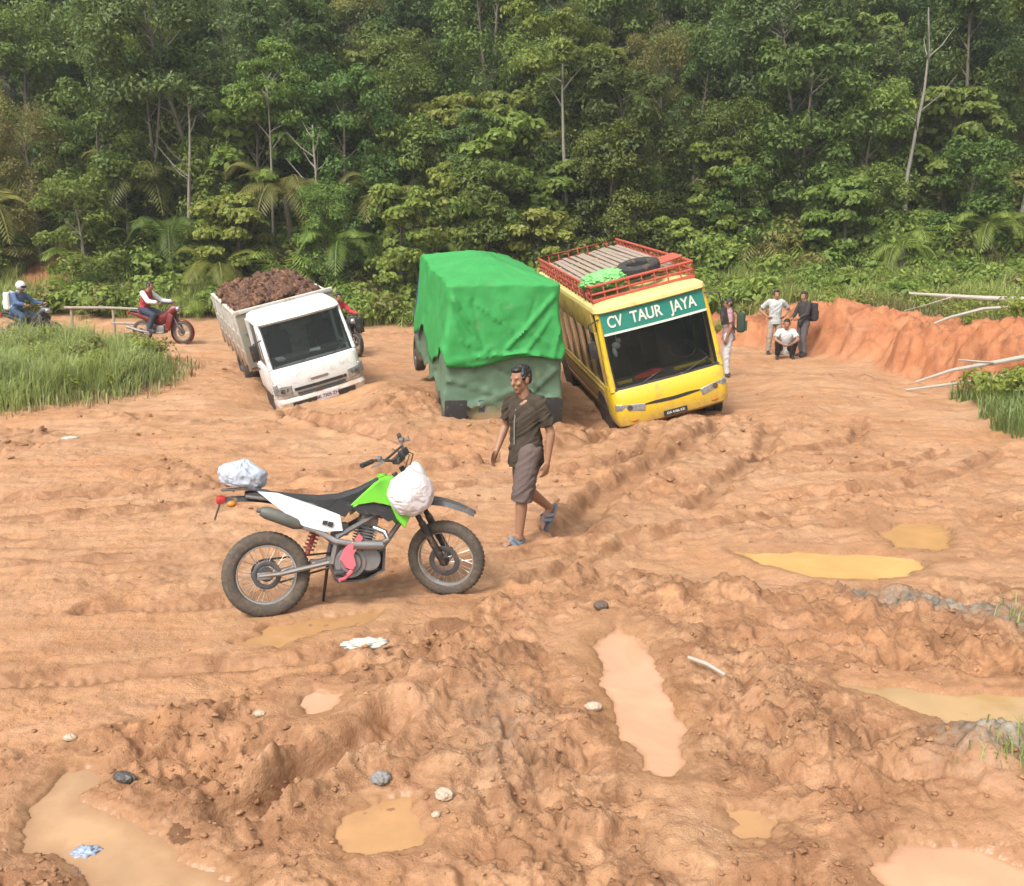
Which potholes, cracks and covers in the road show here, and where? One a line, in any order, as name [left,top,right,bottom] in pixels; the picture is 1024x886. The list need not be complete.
pothole [870,517,964,552]
pothole [222,605,396,651]
pothole [0,751,260,886]
pothole [282,680,359,720]
pothole [703,791,811,854]
pothole [825,669,1024,726]
pothole [848,822,1024,886]
pothole [724,545,936,582]
pothole [314,781,444,865]
pothole [580,617,703,783]
